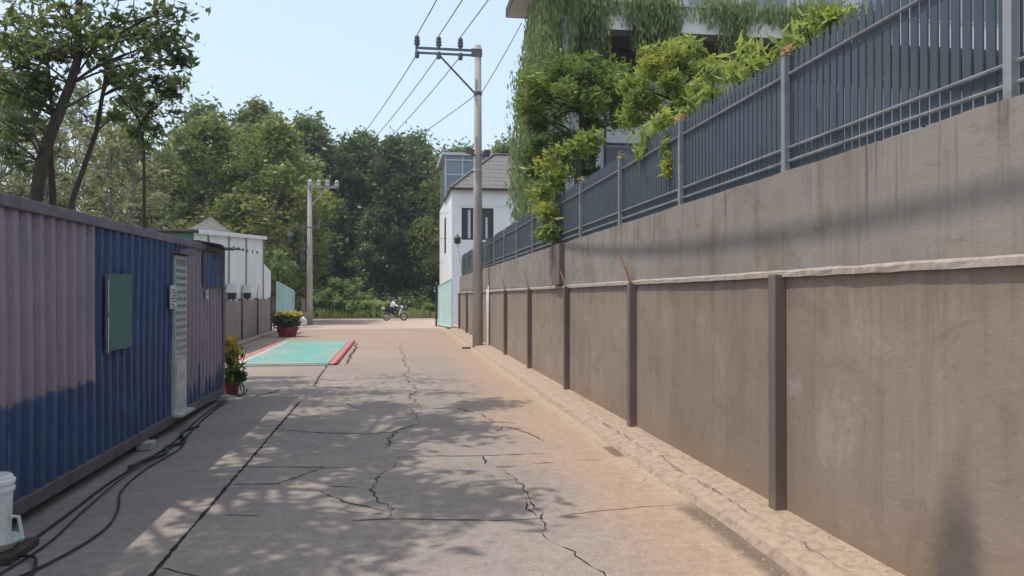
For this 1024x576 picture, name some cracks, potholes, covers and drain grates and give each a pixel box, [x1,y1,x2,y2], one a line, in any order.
crack [232,344,677,576]
